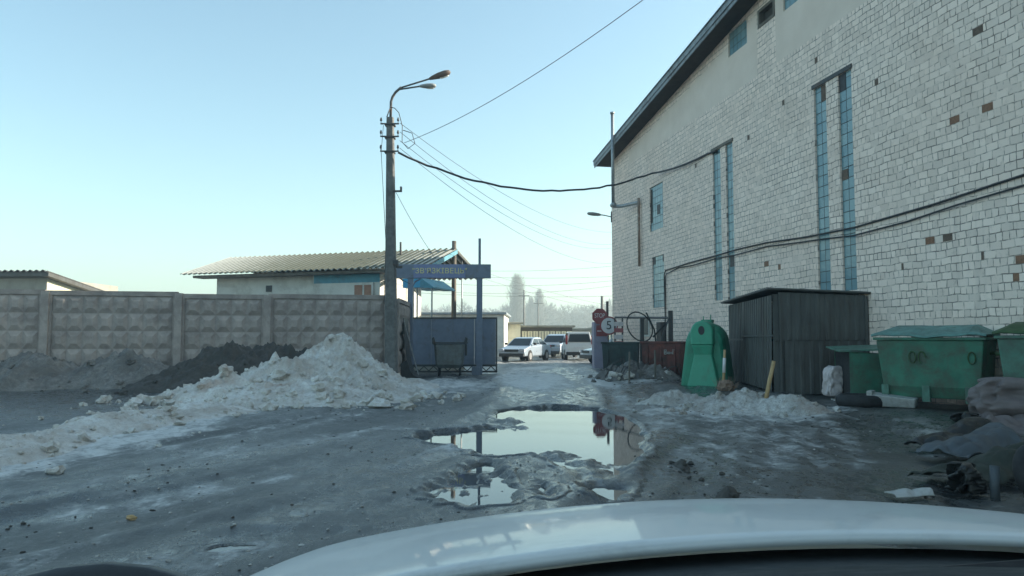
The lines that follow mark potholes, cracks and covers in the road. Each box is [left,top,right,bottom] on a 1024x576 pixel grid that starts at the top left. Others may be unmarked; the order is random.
pothole [400,403,662,504]
pothole [192,541,269,556]
